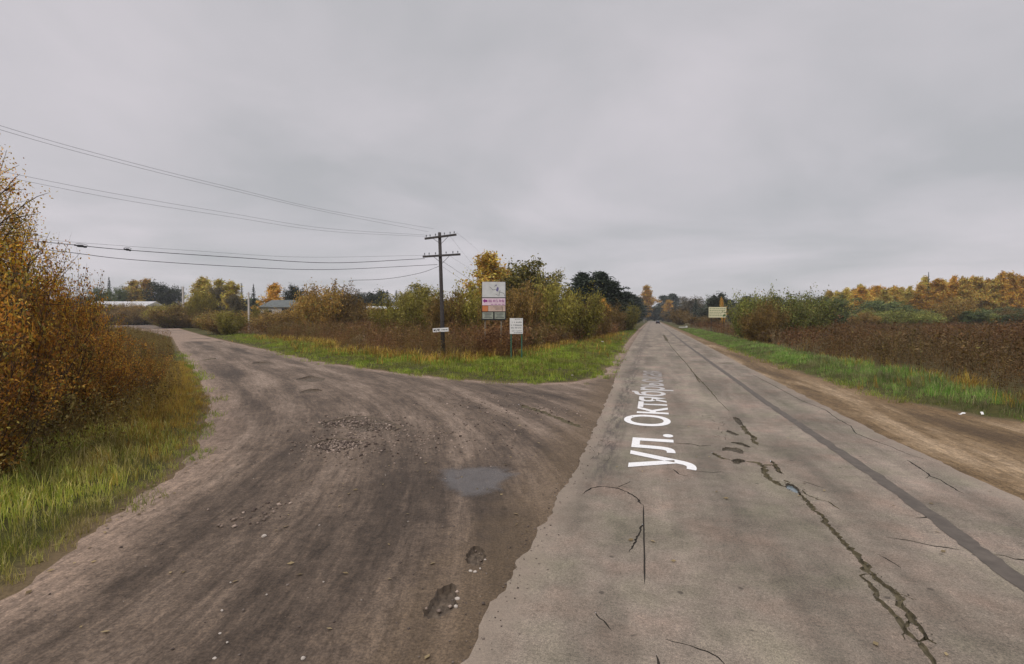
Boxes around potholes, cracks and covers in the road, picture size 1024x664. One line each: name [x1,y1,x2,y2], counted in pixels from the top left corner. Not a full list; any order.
crack [583,482,646,584]
pothole [465,546,487,565]
crack [664,335,1024,664]
pothole [422,583,459,619]
